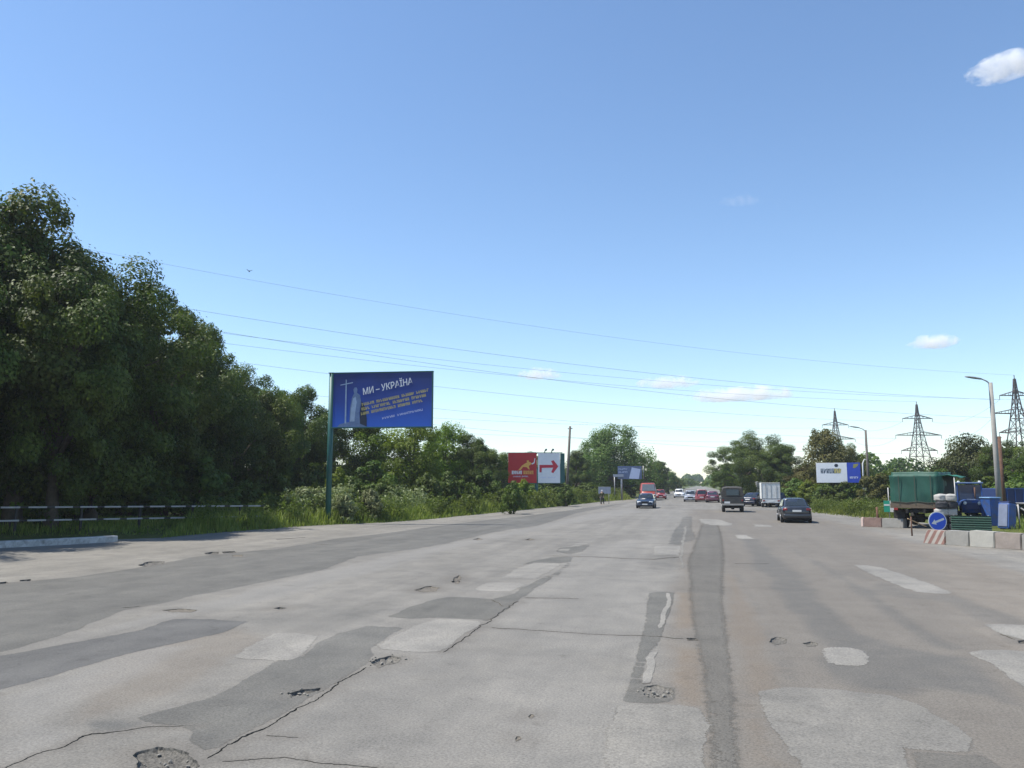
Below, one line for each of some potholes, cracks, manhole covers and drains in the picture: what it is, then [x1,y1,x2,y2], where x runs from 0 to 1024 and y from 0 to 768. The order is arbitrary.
pothole [133,747,200,768]
crack [5,726,178,768]
pothole [637,683,674,699]
pothole [280,688,324,697]
pothole [370,654,407,668]
pothole [769,637,787,645]
